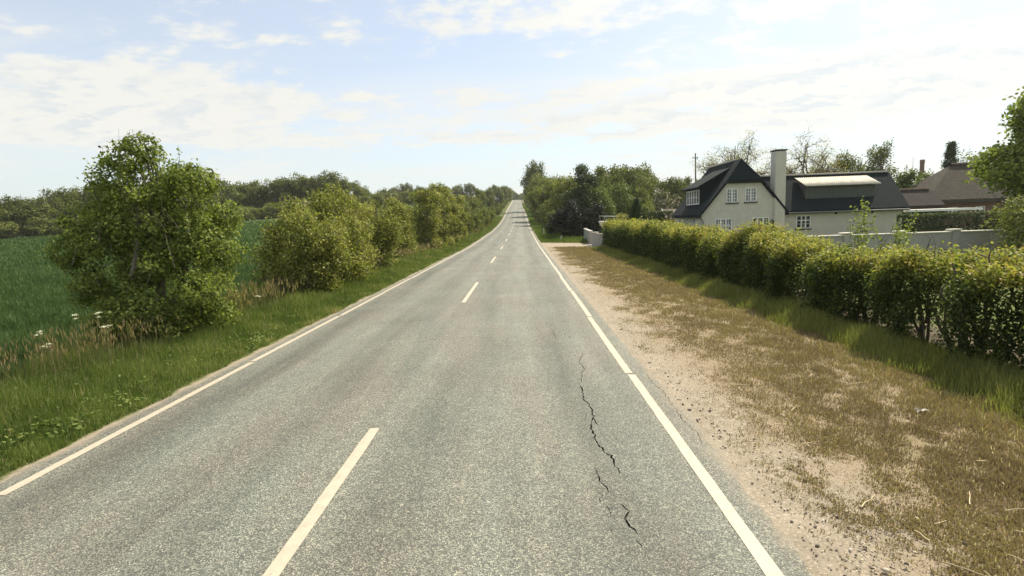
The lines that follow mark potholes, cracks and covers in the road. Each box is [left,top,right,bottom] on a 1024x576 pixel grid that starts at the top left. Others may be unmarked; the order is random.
crack [579,357,642,571]
